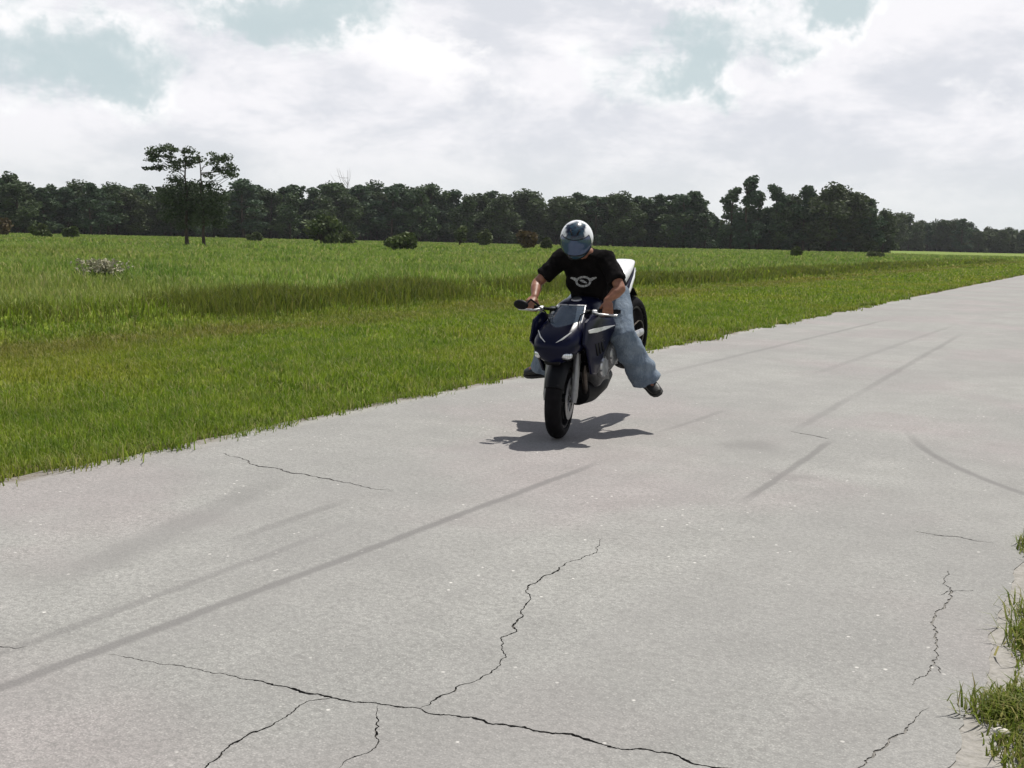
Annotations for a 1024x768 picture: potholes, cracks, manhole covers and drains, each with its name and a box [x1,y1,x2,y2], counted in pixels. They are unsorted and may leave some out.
crack [224,453,391,491]
crack [912,571,973,685]
crack [858,709,926,768]
crack [123,539,721,768]
